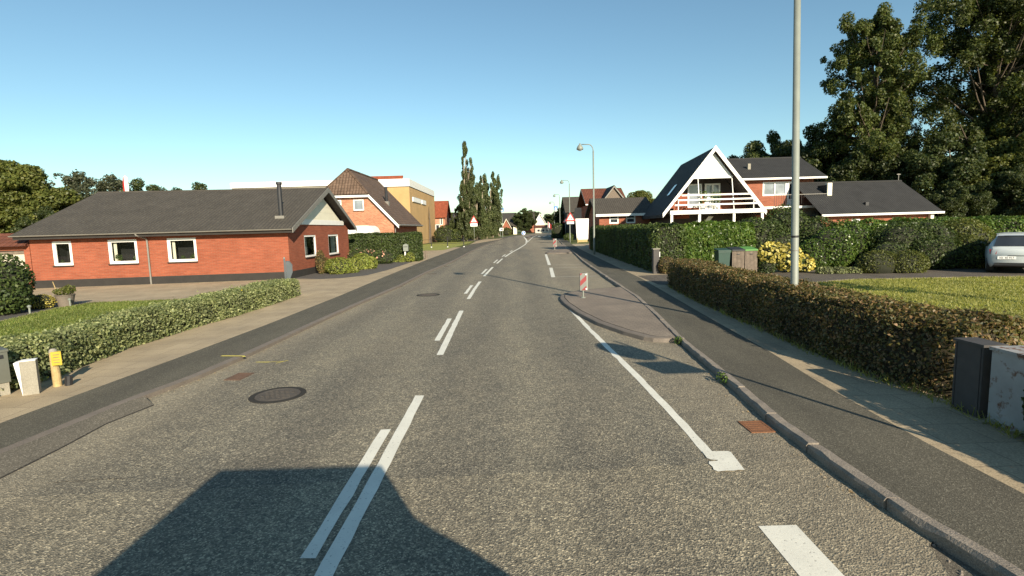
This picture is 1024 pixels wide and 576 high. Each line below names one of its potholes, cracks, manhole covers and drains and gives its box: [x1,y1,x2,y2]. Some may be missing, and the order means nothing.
drain grate [738,420,776,433]
manhole cover [248,387,306,404]
